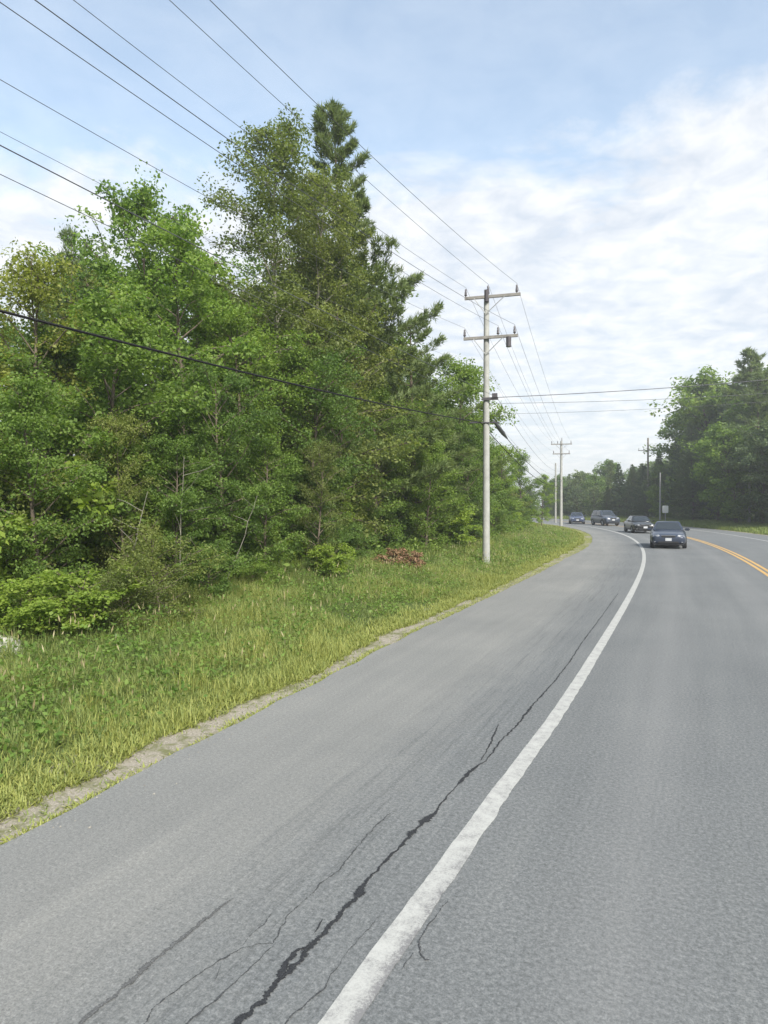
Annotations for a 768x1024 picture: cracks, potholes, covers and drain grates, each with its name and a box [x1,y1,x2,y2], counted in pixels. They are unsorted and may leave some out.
crack [79,594,618,1024]
